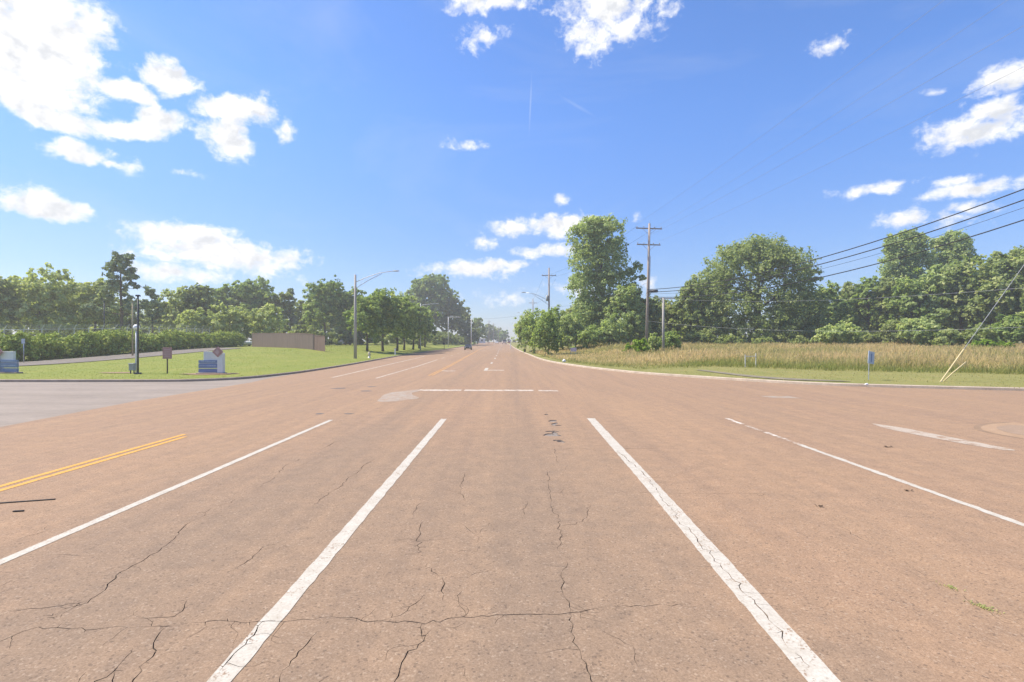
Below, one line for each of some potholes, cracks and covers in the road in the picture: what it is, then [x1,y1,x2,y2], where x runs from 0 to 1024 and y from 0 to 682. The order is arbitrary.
crack [2,449,678,682]
